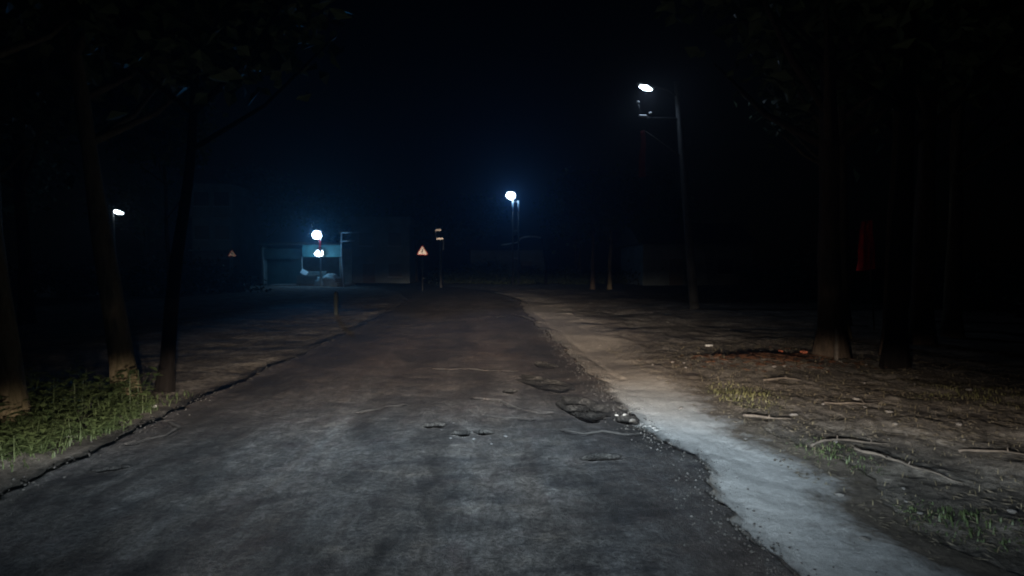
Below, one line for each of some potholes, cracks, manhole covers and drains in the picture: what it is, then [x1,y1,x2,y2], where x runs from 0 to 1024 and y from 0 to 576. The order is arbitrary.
pothole [515,374,577,394]
crack [358,404,402,413]
pothole [577,453,626,462]
pothole [615,415,640,427]
crack [127,420,187,445]
pothole [554,396,613,424]
crack [472,397,640,437]
